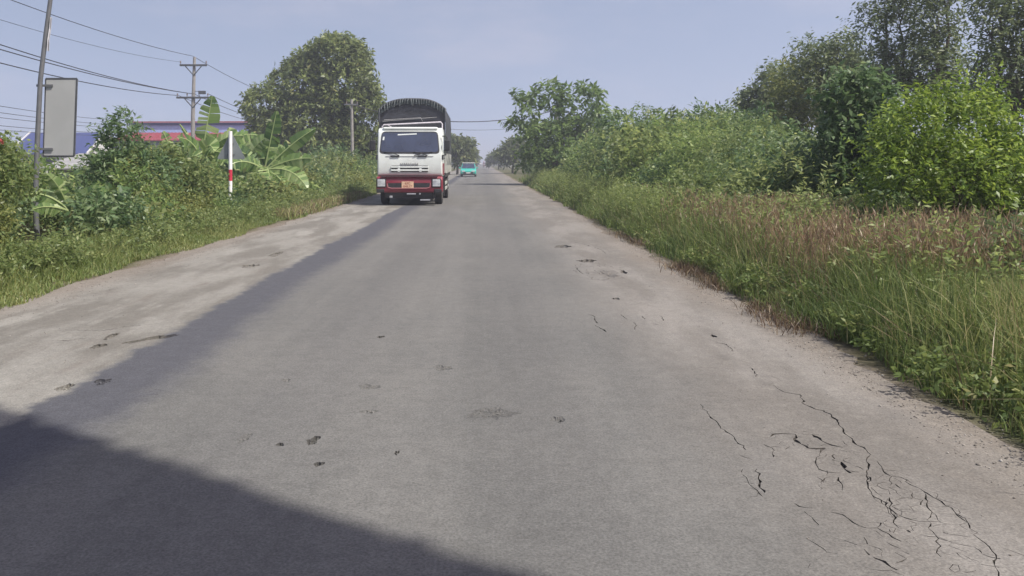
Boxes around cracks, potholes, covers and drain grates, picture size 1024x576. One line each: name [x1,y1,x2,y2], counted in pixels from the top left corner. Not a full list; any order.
crack [700,385,1024,576]
pothole [467,407,521,420]
